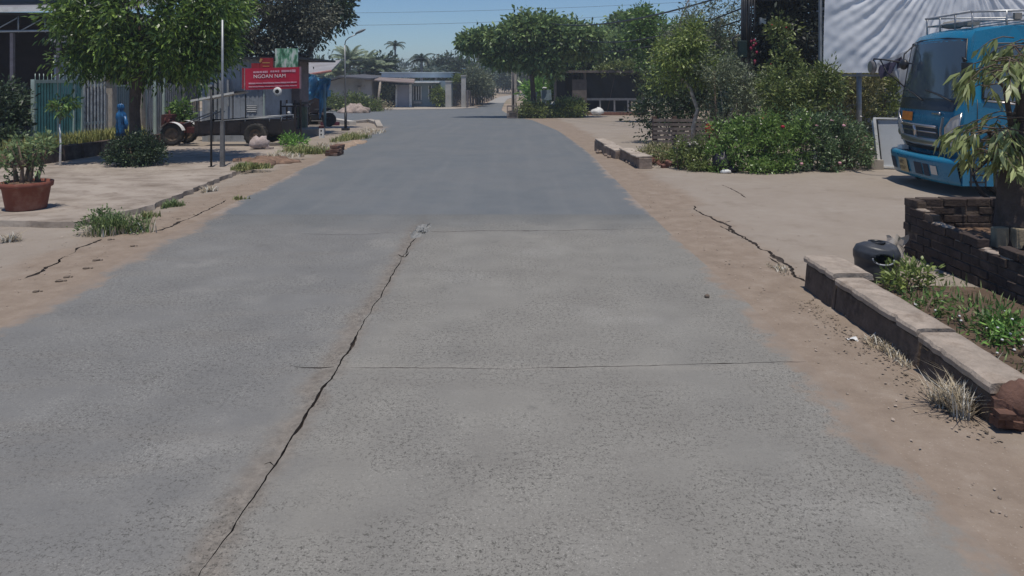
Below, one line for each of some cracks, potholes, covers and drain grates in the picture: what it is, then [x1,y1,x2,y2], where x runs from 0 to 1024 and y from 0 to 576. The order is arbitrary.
crack [198,232,772,576]
crack [26,239,101,278]
crack [157,200,226,231]
crack [693,206,805,281]
